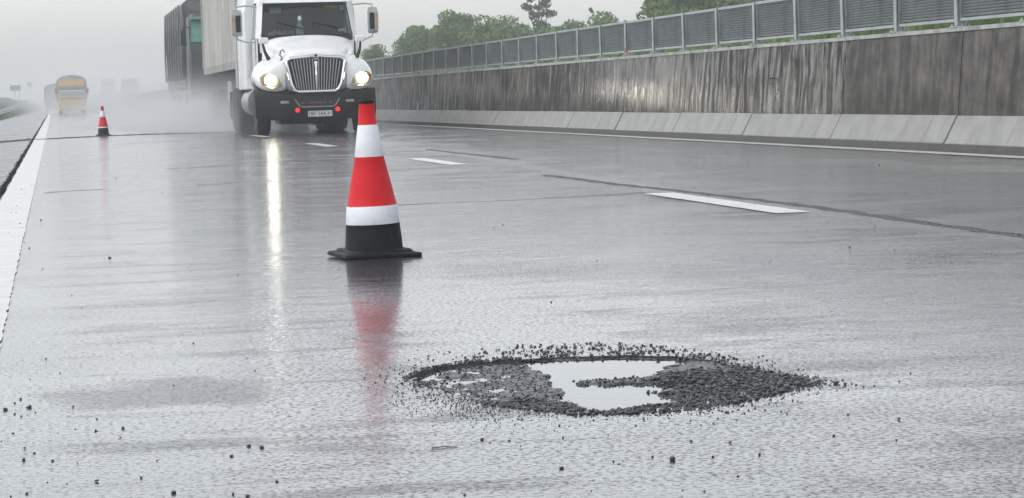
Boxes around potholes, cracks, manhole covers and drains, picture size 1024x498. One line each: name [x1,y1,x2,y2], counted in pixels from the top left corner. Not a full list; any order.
pothole [346,341,857,447]
